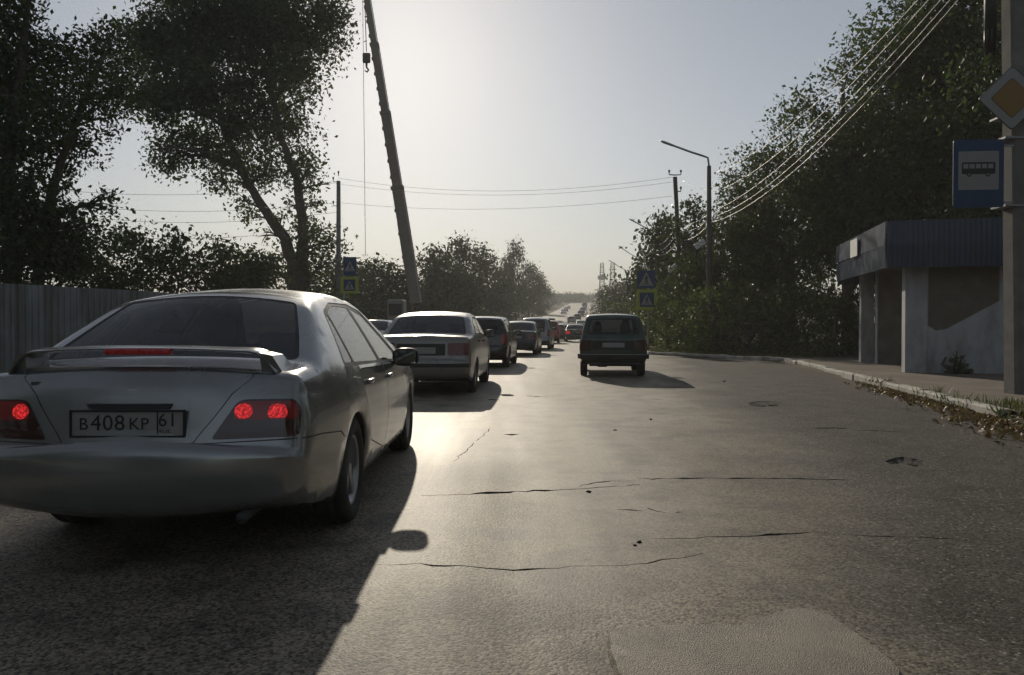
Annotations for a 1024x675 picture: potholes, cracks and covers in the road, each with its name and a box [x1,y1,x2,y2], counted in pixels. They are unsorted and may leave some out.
pothole [885,457,926,467]
crack [421,478,843,496]
crack [396,532,1010,571]
